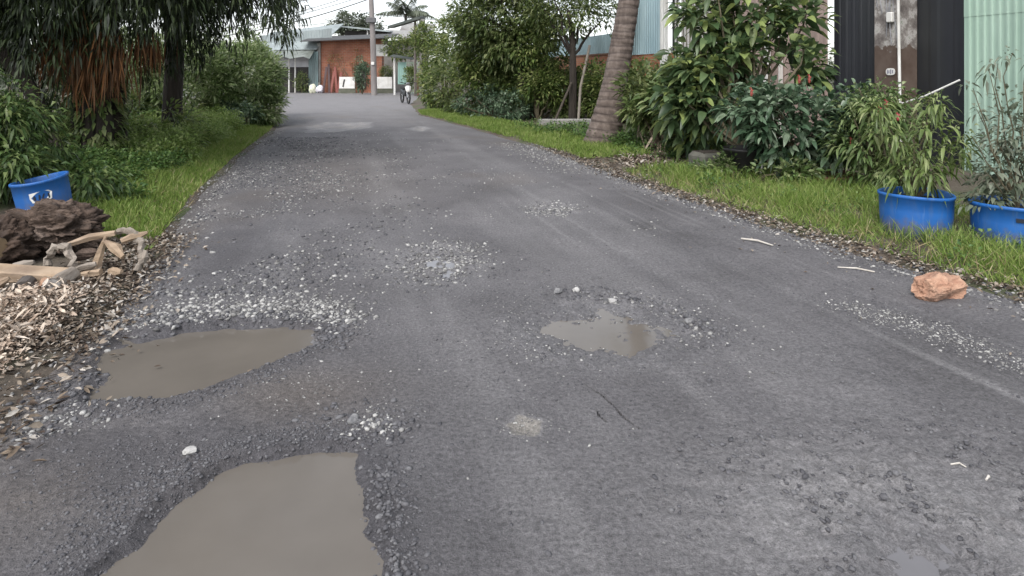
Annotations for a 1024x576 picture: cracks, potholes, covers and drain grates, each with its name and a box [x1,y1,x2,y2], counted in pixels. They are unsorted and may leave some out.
crack [593,389,641,429]
pothole [77,315,322,402]
pothole [77,437,395,576]
pothole [505,291,713,365]
